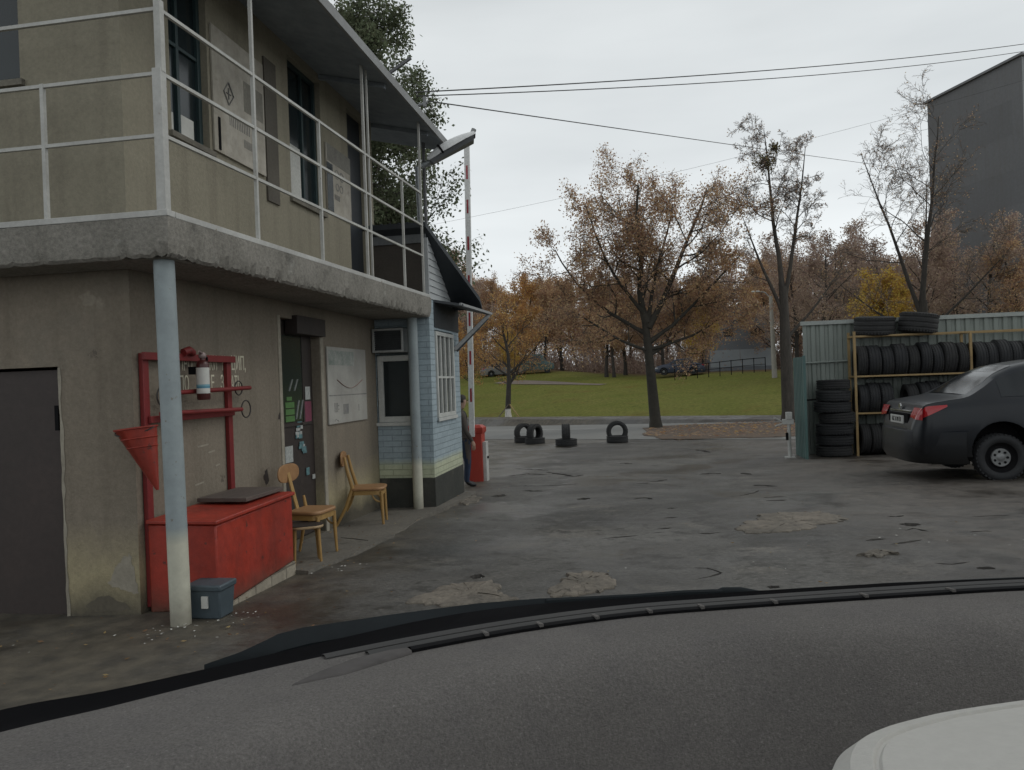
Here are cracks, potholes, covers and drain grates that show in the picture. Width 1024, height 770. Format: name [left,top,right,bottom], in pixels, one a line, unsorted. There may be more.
crack [866,515,926,544]
crack [512,469,581,491]
